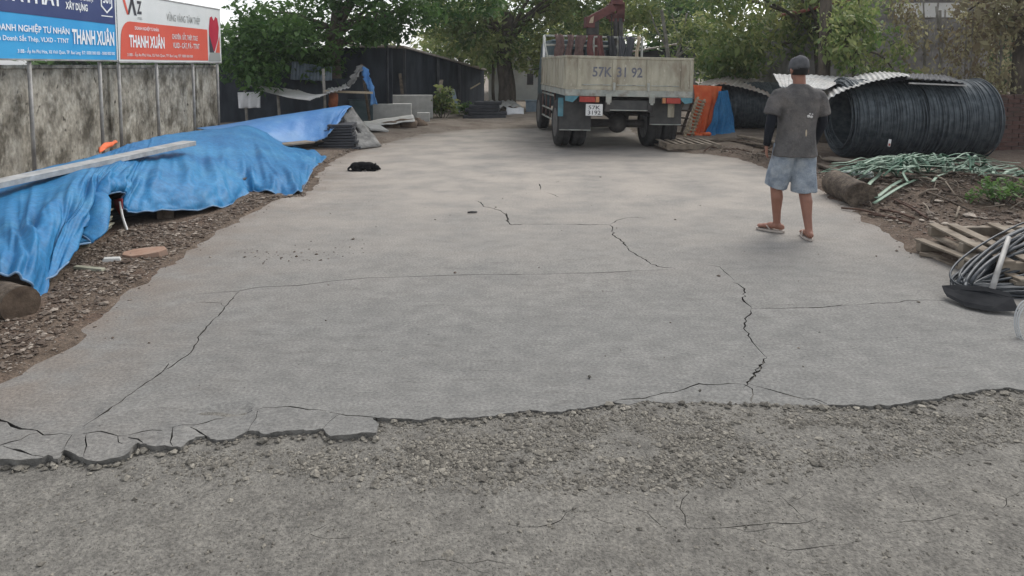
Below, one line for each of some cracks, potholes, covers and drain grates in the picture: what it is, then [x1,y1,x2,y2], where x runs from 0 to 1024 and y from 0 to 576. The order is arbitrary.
crack [478,201,671,268]
crack [613,265,946,404]
crack [504,494,847,551]
crack [0,292,377,457]
